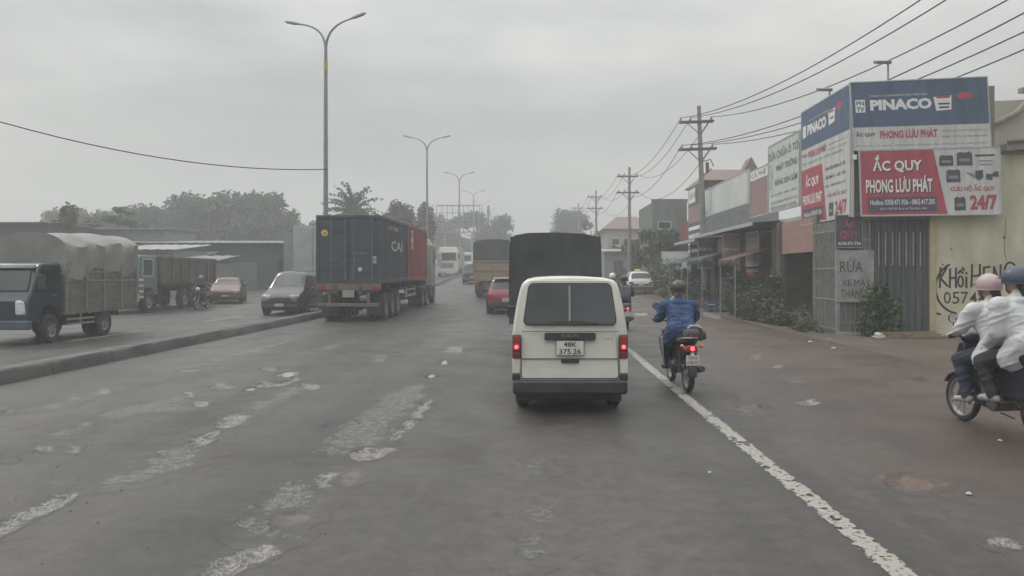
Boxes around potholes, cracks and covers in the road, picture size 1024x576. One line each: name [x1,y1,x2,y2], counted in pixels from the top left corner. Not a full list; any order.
pothole [207,413,254,429]
crack [0,381,439,550]
pothole [388,430,410,443]
pothole [0,488,81,543]
pothole [186,437,222,446]
pothole [344,447,403,462]
pothole [249,376,305,388]
pothole [194,430,222,440]
